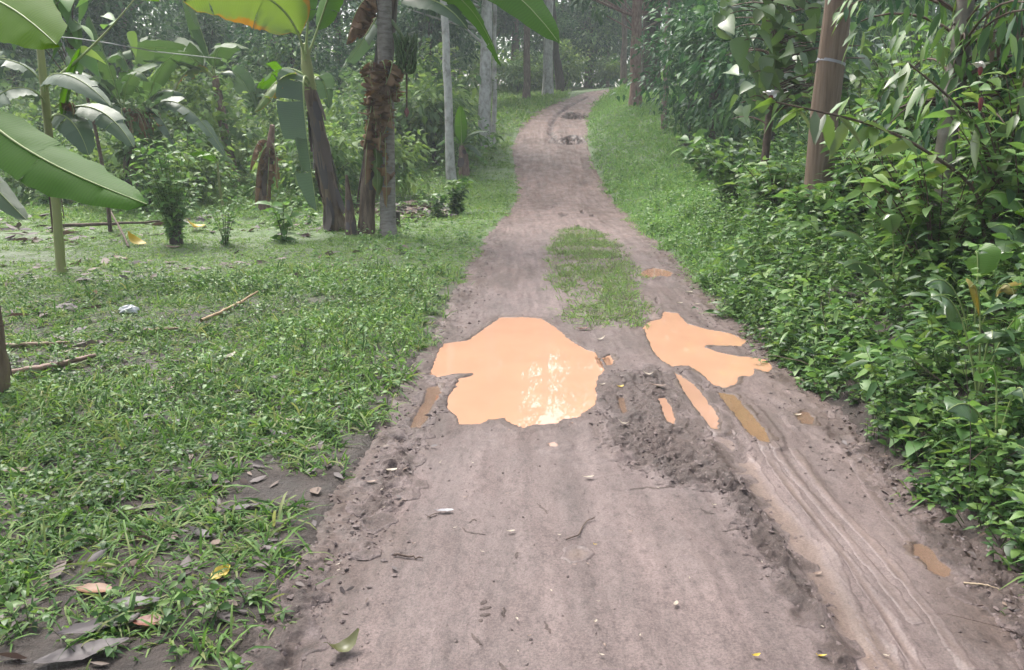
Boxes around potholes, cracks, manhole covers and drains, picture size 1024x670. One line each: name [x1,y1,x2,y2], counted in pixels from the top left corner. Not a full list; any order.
pothole [718,393,780,445]
pothole [642,310,774,389]
pothole [902,541,952,577]
pothole [406,382,446,429]
pothole [673,371,722,431]
pothole [548,134,588,145]
pothole [793,409,821,426]
pothole [561,112,589,120]
pothole [429,316,612,428]
pothole [639,267,675,279]
pothole [657,396,677,424]
